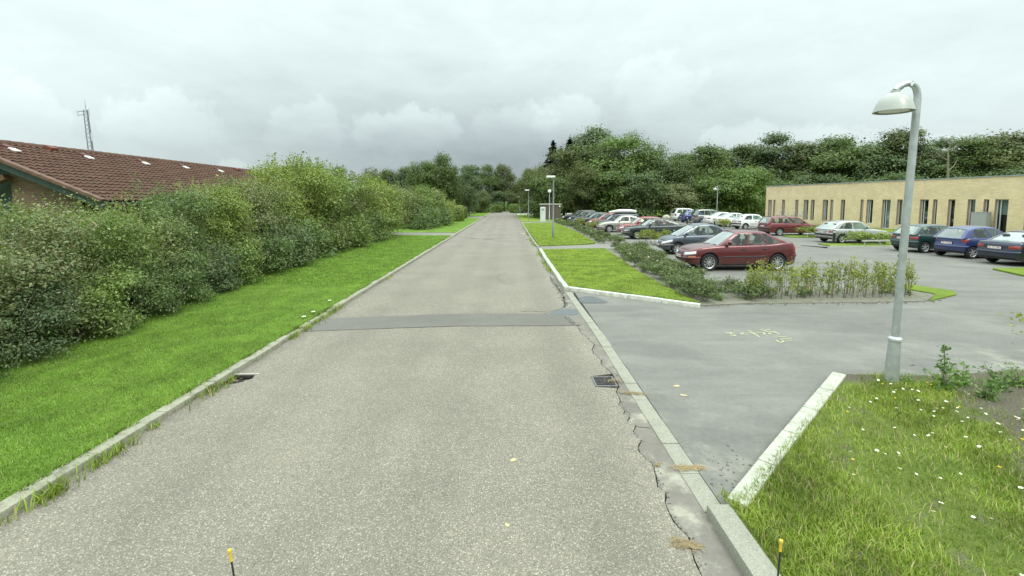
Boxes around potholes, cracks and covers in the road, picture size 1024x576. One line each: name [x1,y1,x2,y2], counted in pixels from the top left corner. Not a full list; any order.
crack [578,327,702,576]
drain grate [220,373,260,385]
drain grate [591,376,618,388]
